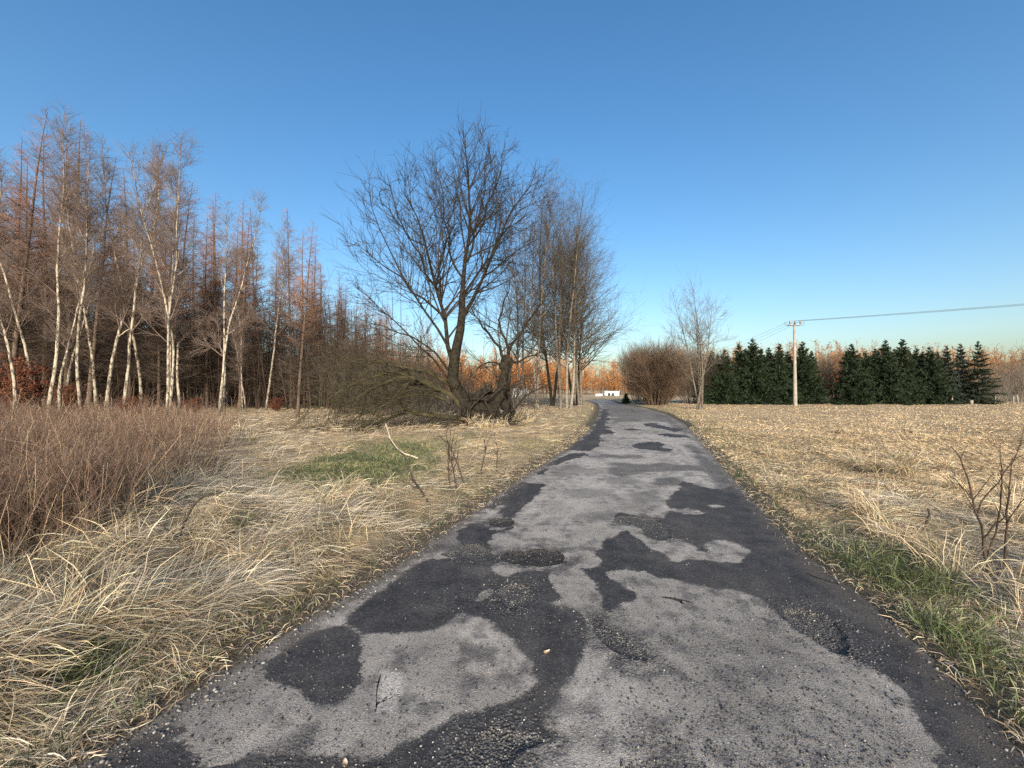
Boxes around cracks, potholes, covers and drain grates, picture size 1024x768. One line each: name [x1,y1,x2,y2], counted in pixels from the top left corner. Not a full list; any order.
pothole [489,519,514,528]
pothole [783,607,851,655]
pothole [614,516,674,538]
pothole [500,549,564,567]
pothole [591,616,652,661]
pothole [495,583,532,610]
